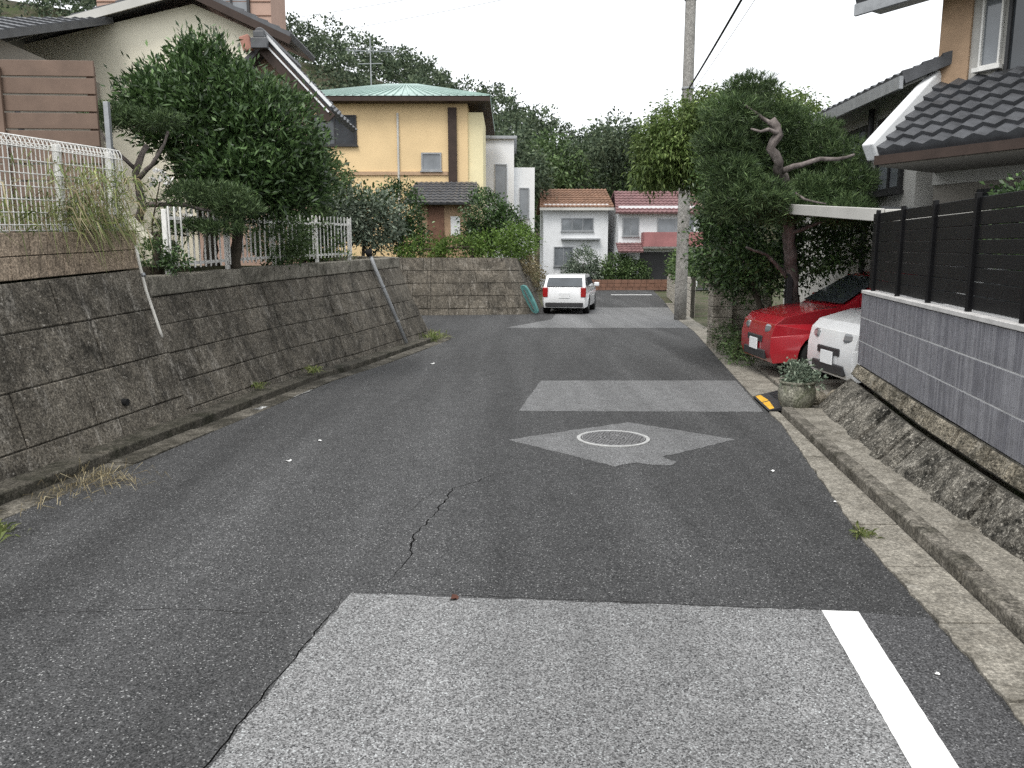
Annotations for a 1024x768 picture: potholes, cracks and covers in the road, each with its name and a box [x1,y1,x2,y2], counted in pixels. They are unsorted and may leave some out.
crack [389,470,518,580]
manhole cover [577,430,650,447]
